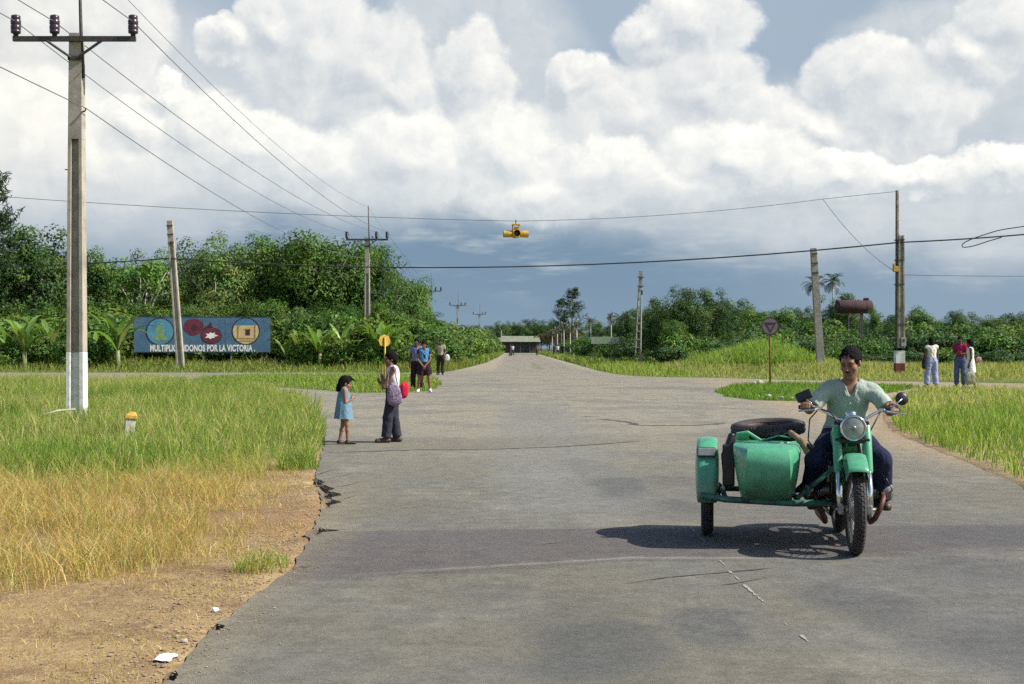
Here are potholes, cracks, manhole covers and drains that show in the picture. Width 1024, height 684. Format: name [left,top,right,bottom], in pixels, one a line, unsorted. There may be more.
crack [349,416,724,452]
crack [623,567,775,586]
